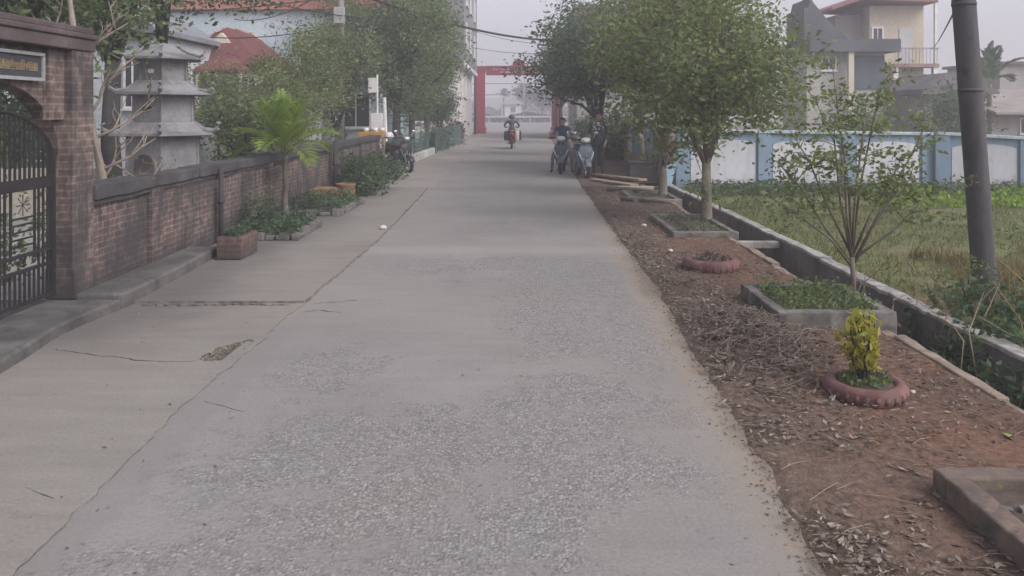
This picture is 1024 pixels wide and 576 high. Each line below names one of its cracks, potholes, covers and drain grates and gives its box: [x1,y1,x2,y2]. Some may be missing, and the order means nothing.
pothole [200,339,254,361]
crack [56,349,190,362]
